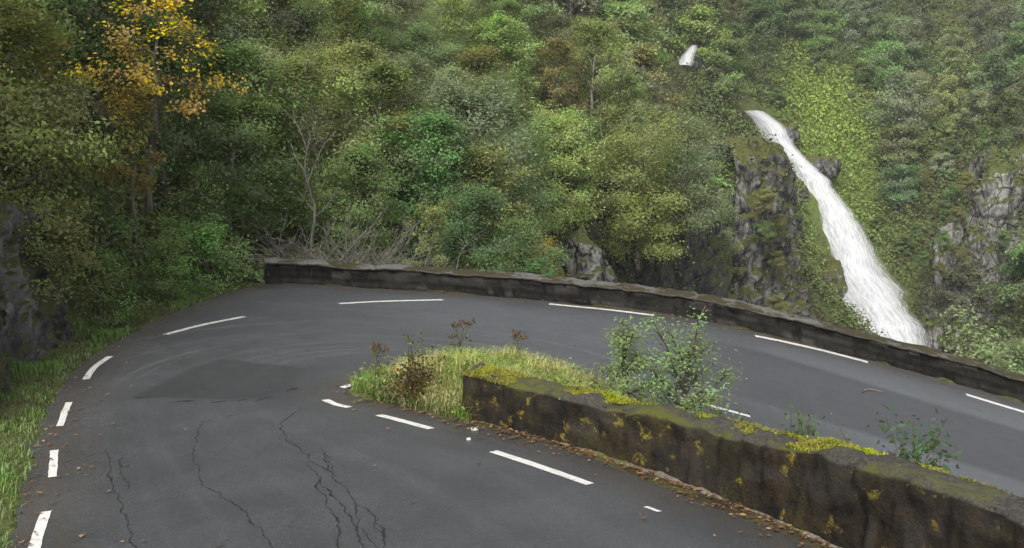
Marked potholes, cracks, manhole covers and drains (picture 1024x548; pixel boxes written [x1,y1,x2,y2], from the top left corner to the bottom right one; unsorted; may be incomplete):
crack [104,449,137,548]
crack [279,409,386,548]
crack [192,421,273,548]
